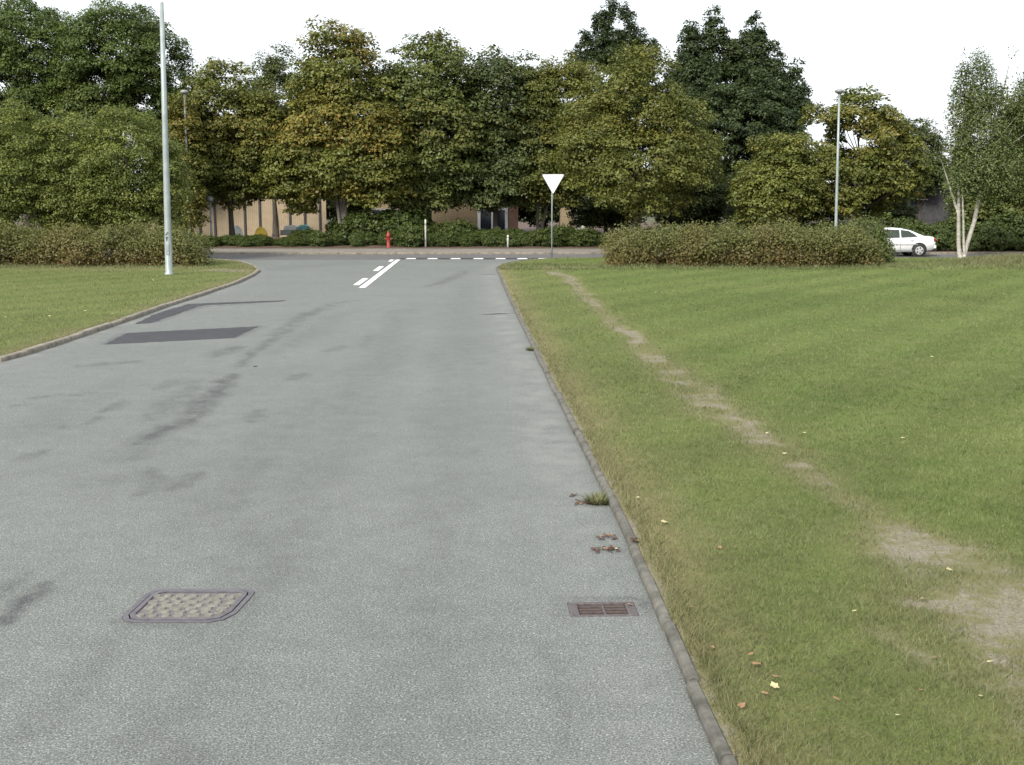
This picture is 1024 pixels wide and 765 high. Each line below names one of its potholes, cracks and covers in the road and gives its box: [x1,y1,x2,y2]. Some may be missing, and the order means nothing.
drain grate [567,601,639,617]
manhole cover [122,589,254,623]
